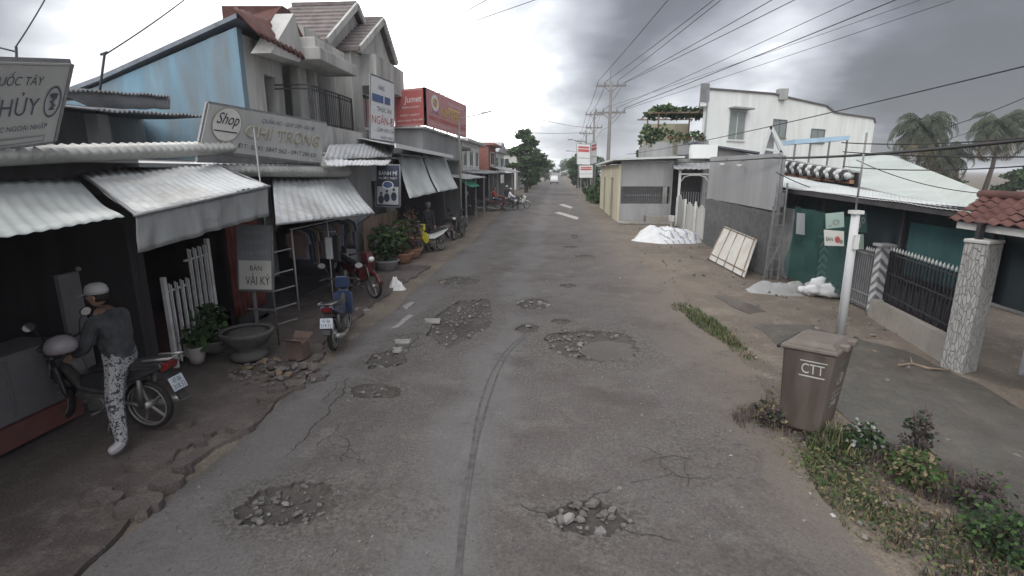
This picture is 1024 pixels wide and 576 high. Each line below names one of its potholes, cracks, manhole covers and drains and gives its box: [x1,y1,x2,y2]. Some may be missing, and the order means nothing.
crack [628,446,712,488]
pothole [232,480,338,529]
pothole [515,324,540,333]
pothole [437,277,480,286]
pothole [365,350,407,370]
pothole [516,298,551,310]
pothole [546,498,633,538]
pothole [544,327,639,363]
crack [586,488,676,541]
pothole [423,299,494,348]
